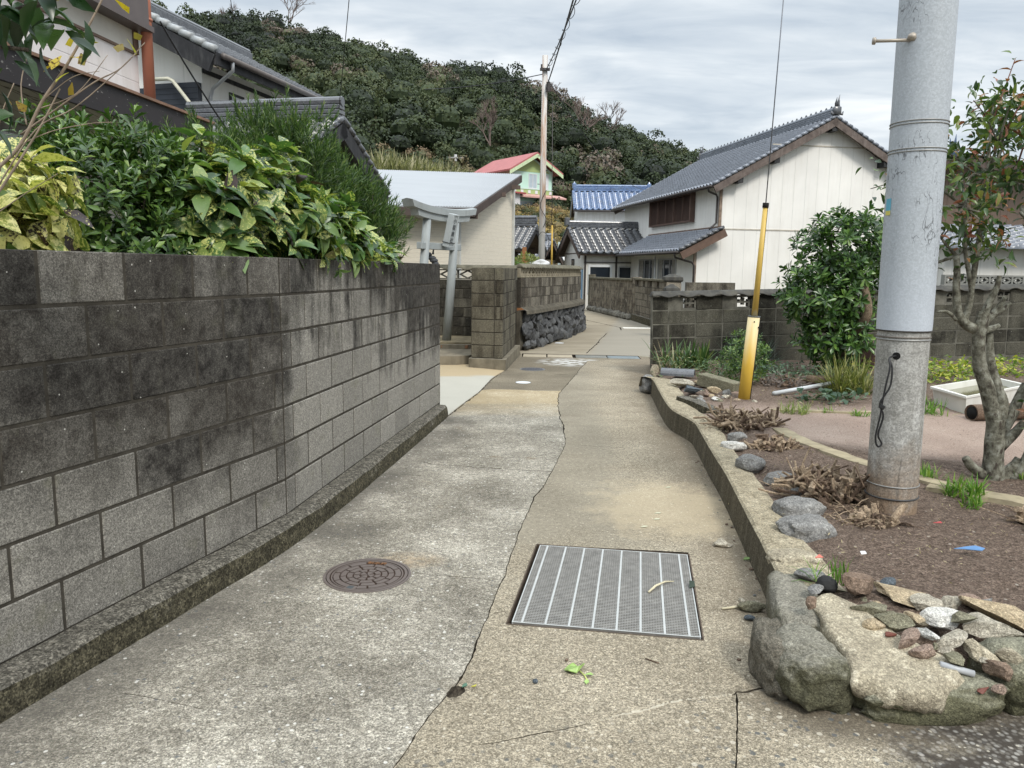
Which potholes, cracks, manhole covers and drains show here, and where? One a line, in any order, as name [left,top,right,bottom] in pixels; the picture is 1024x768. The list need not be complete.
manhole cover [323,558,411,593]
crack [393,320,762,768]
drain grate [506,544,704,641]
